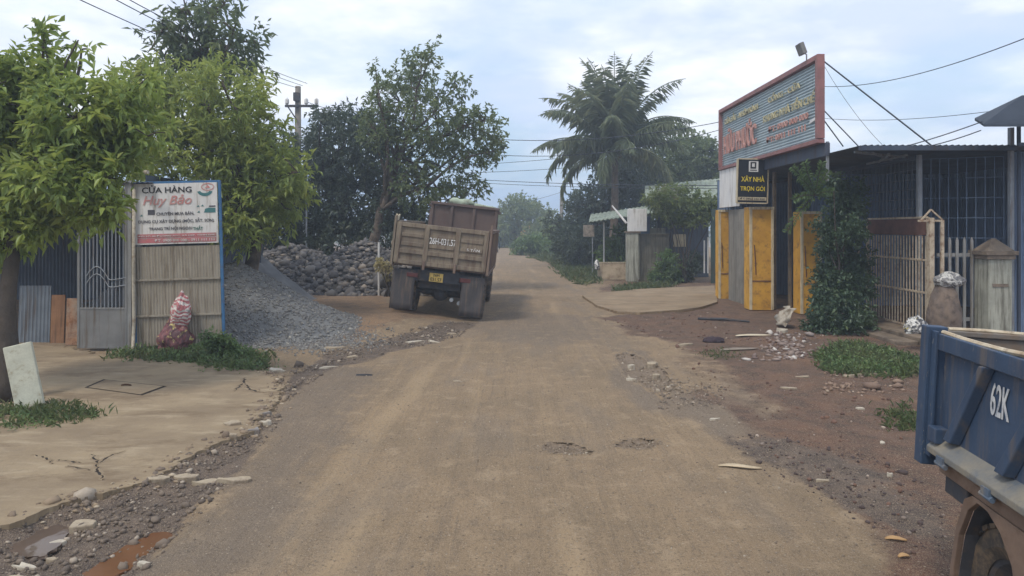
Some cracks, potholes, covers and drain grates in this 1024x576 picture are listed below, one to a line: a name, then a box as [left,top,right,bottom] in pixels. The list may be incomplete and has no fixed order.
crack [234,377,282,393]
pothole [604,436,669,450]
manhole cover [85,379,166,395]
crack [30,450,126,480]
pothole [534,440,602,461]
